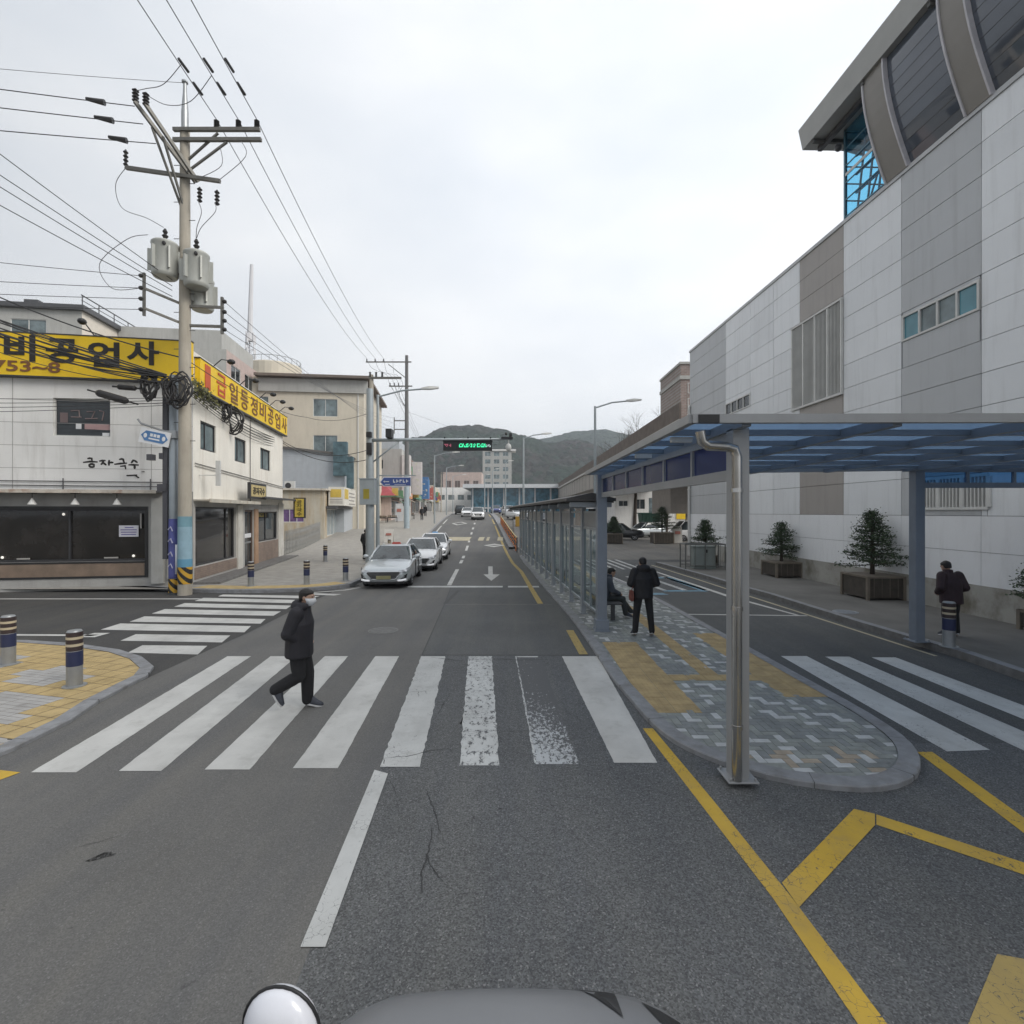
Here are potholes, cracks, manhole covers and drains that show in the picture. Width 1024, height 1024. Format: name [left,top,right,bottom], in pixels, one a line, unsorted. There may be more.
pothole [86,852,116,861]
crack [420,792,448,890]
